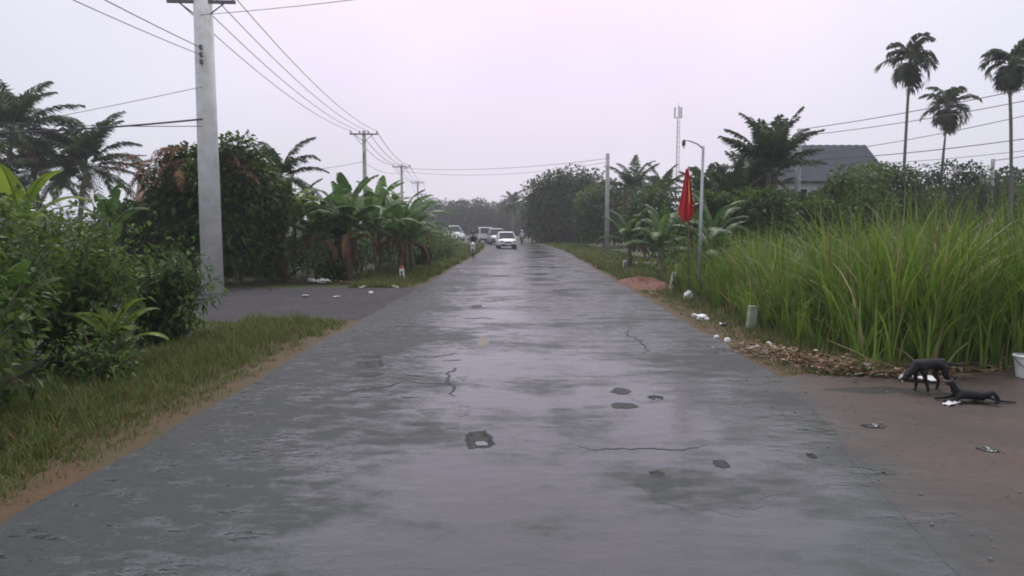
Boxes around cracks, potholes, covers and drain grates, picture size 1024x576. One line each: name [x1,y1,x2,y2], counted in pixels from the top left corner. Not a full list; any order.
pothole [713,460,731,468]
pothole [355,360,385,368]
pothole [464,430,495,448]
crack [349,353,457,398]
